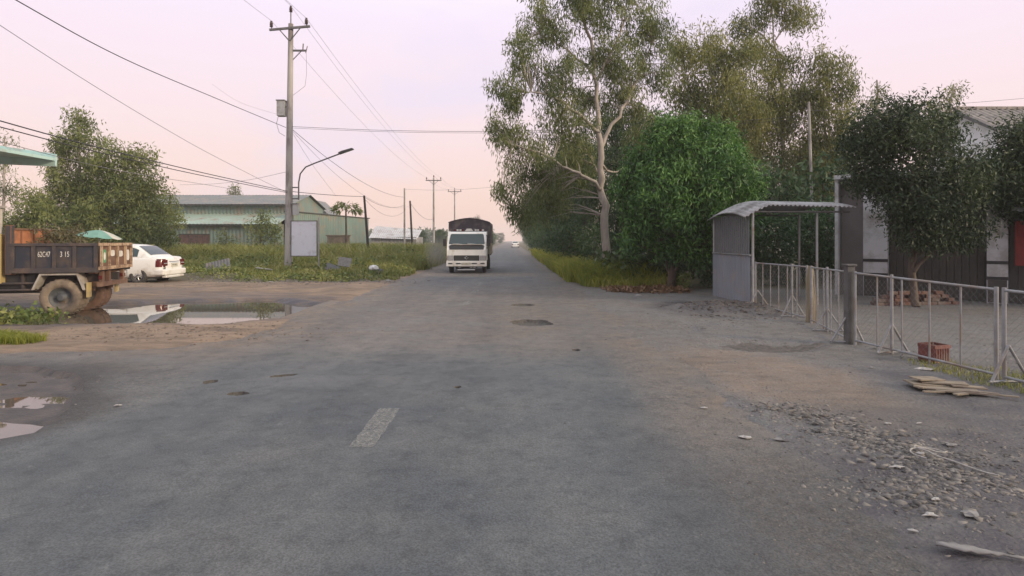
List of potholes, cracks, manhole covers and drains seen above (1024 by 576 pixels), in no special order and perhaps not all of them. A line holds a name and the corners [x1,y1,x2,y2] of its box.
pothole [719,342,825,353]
pothole [0,366,84,439]
